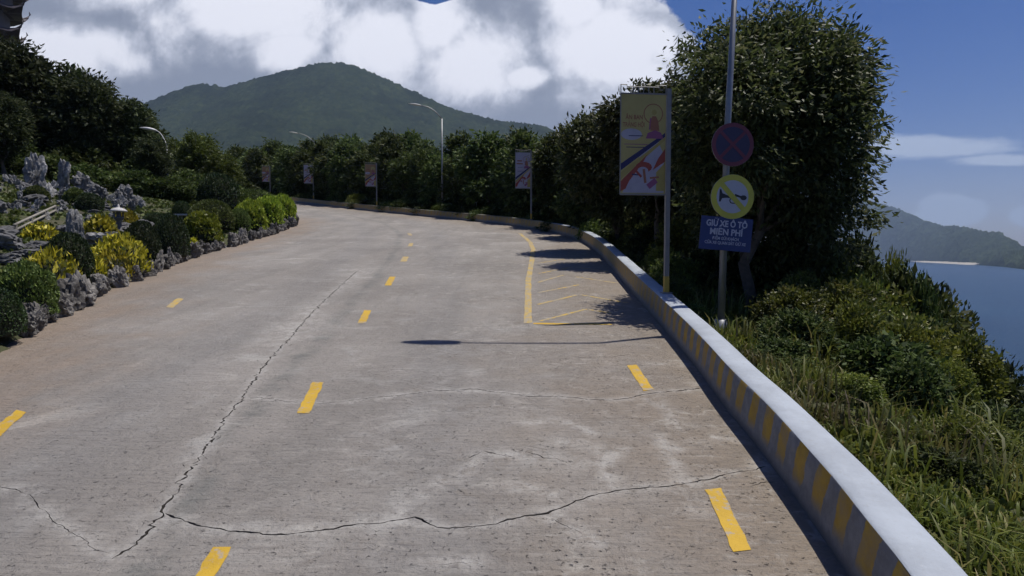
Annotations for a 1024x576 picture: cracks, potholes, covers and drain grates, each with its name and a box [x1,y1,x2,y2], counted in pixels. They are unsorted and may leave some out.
crack [2,273,765,559]
